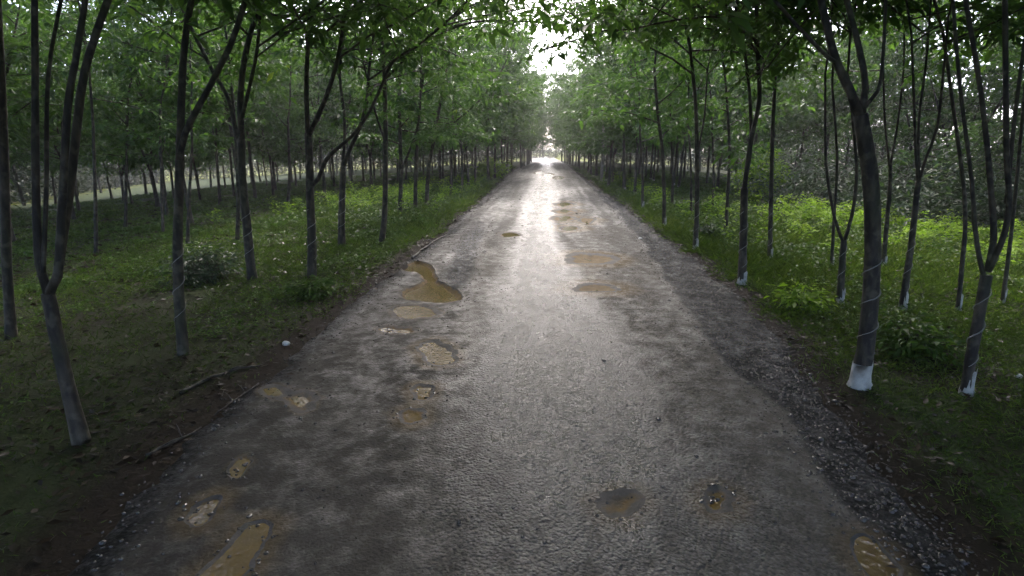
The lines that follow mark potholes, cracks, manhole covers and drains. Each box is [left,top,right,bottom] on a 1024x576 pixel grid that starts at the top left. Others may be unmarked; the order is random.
pothole [224,453,255,480]
pothole [372,324,421,336]
pothole [588,485,661,522]
pothole [699,480,740,516]
pothole [390,407,428,425]
pothole [571,282,621,293]
pothole [849,533,904,576]
pothole [177,494,225,528]
pothole [400,260,465,308]
pothole [188,513,279,576]
pothole [409,383,439,401]
pothole [412,339,465,369]
